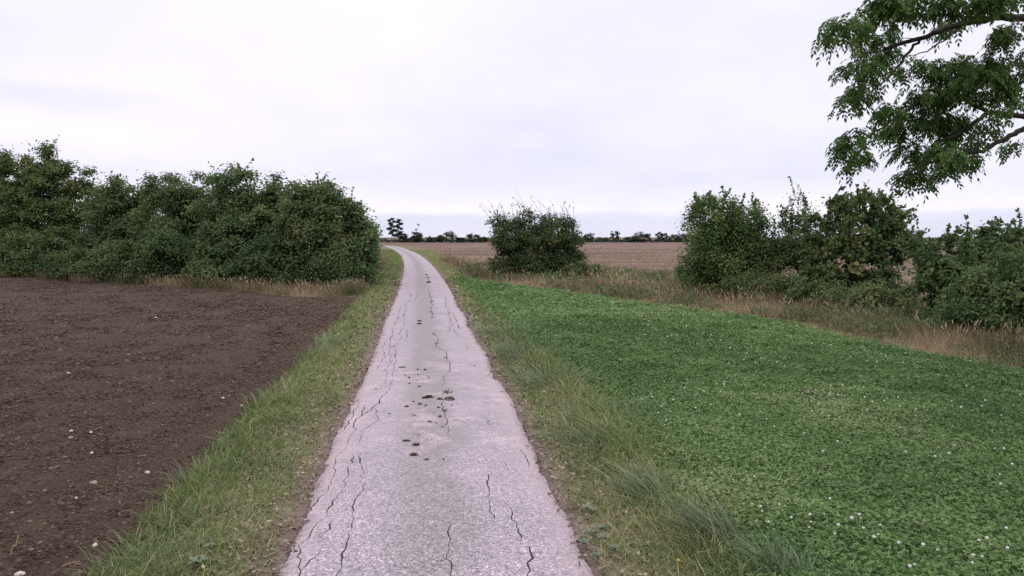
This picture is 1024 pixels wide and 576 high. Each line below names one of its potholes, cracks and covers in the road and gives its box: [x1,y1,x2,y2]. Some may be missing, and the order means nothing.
crack [486,451,534,576]
crack [427,276,468,432]
crack [288,293,418,576]
